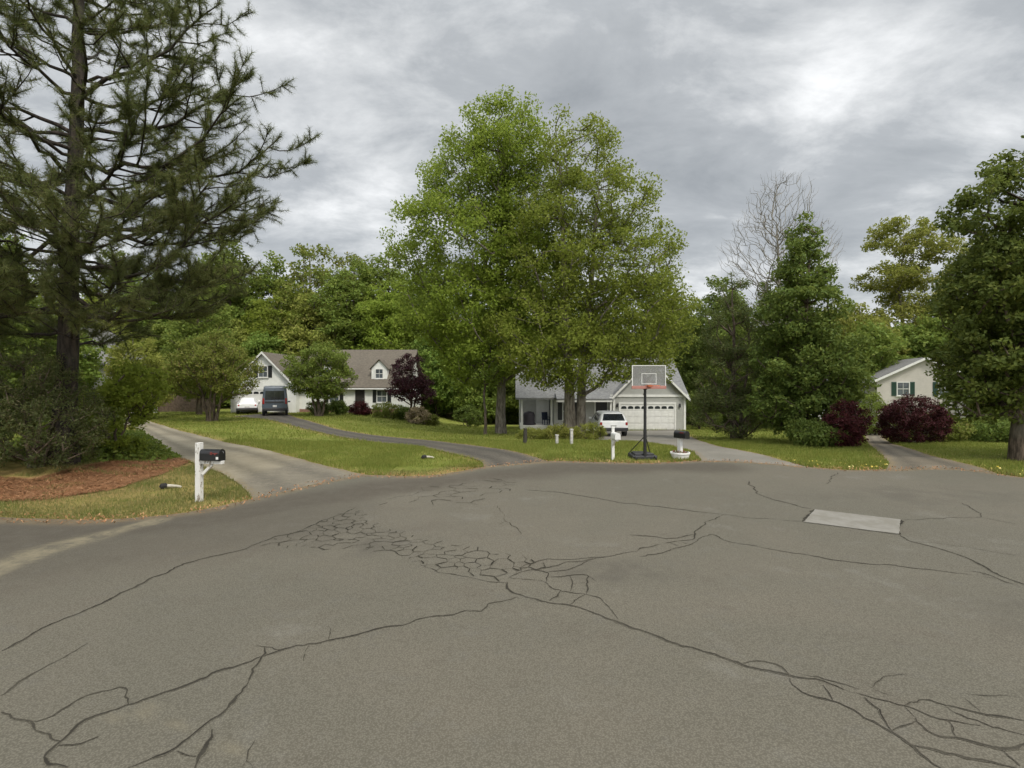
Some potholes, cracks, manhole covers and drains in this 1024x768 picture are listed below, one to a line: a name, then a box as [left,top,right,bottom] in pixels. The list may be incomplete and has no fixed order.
crack [1,508,1024,768]
crack [380,479,521,533]
crack [534,482,810,557]
